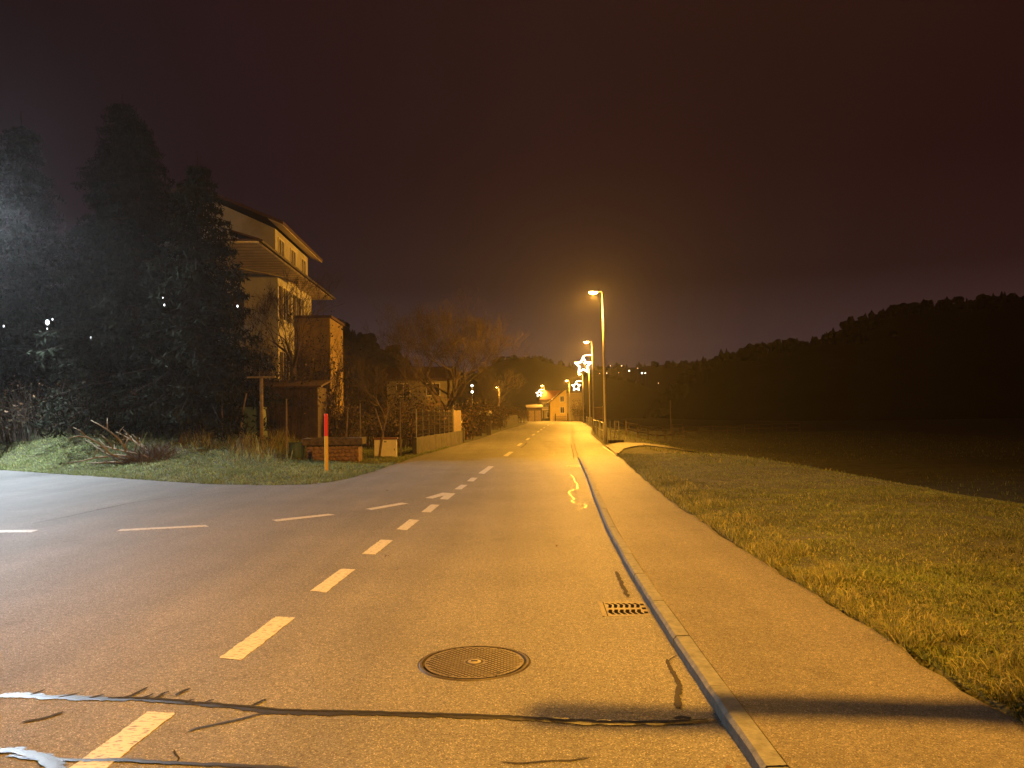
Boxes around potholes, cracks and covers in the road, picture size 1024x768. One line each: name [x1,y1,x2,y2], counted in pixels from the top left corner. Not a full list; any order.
manhole cover [418,646,531,681]
drain grate [598,601,652,617]
